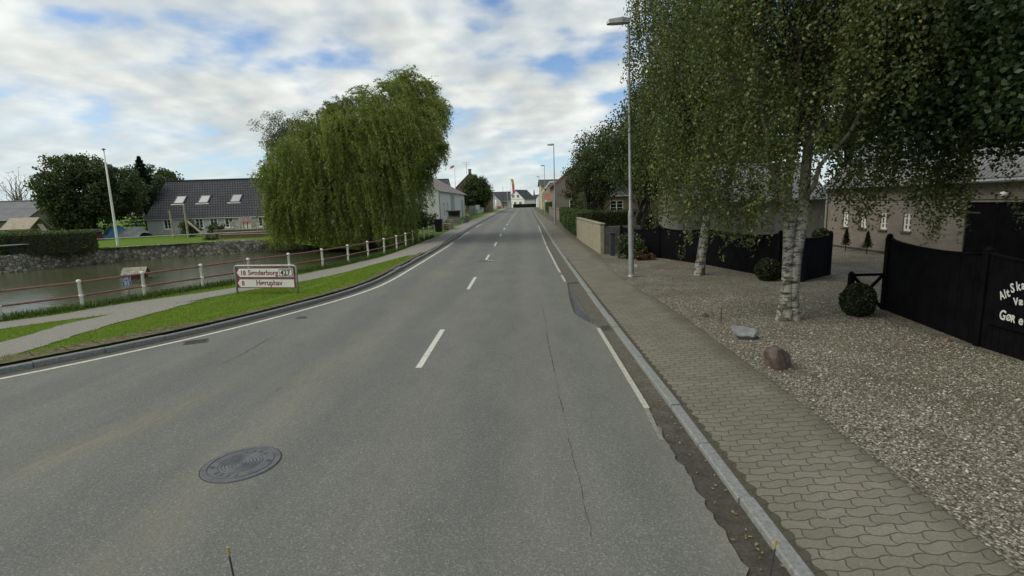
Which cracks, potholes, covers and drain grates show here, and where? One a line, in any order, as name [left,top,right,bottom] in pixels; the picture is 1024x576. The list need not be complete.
crack [541,304,591,535]
manhole cover [198,446,282,483]
